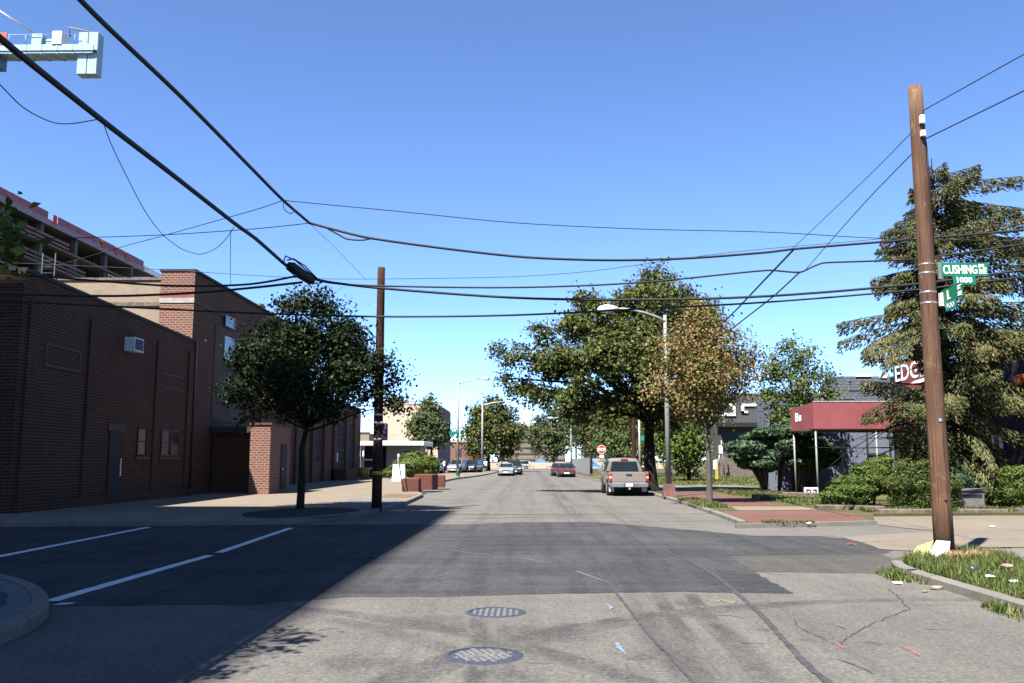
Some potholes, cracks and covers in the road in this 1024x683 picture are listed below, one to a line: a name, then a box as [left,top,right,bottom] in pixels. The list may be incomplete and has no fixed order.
manhole cover [443,647,524,665]
crack [824,589,925,674]
manhole cover [465,607,526,618]
